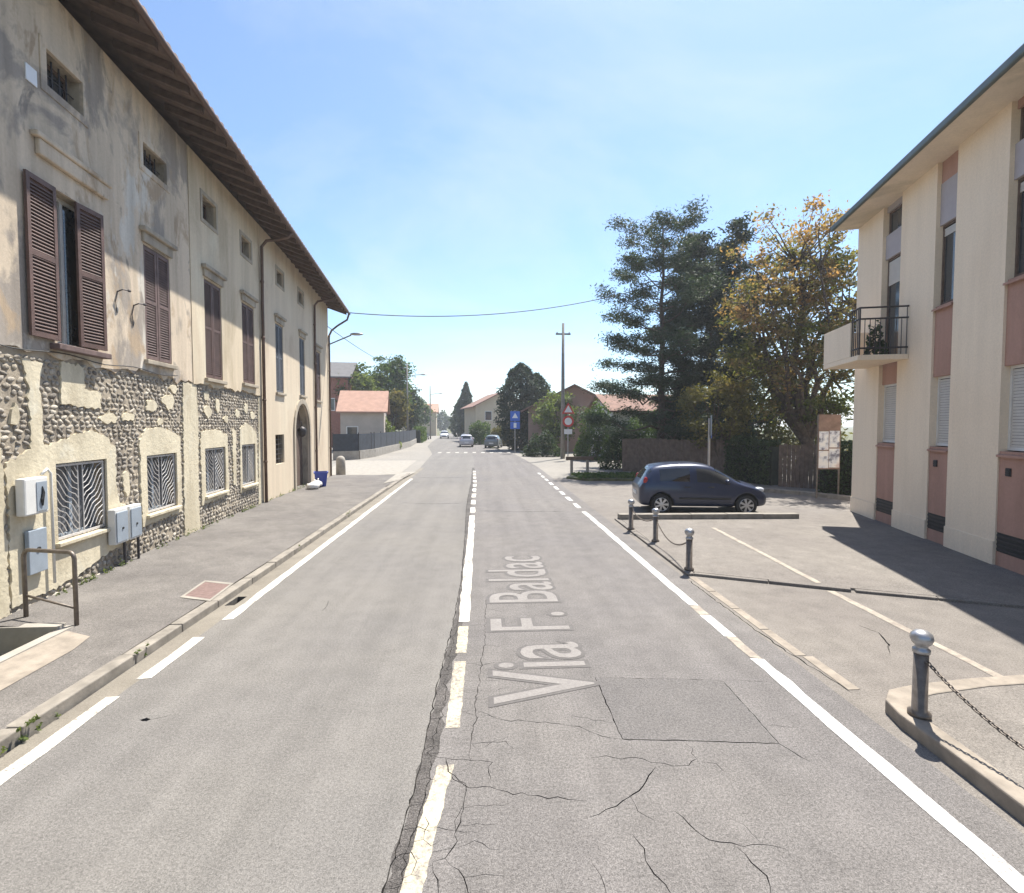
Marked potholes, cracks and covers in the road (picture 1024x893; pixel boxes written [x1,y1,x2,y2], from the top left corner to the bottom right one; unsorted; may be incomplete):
manhole cover [181,580,233,601]
crack [381,485,618,893]
crack [591,750,717,821]
crack [632,834,670,892]
